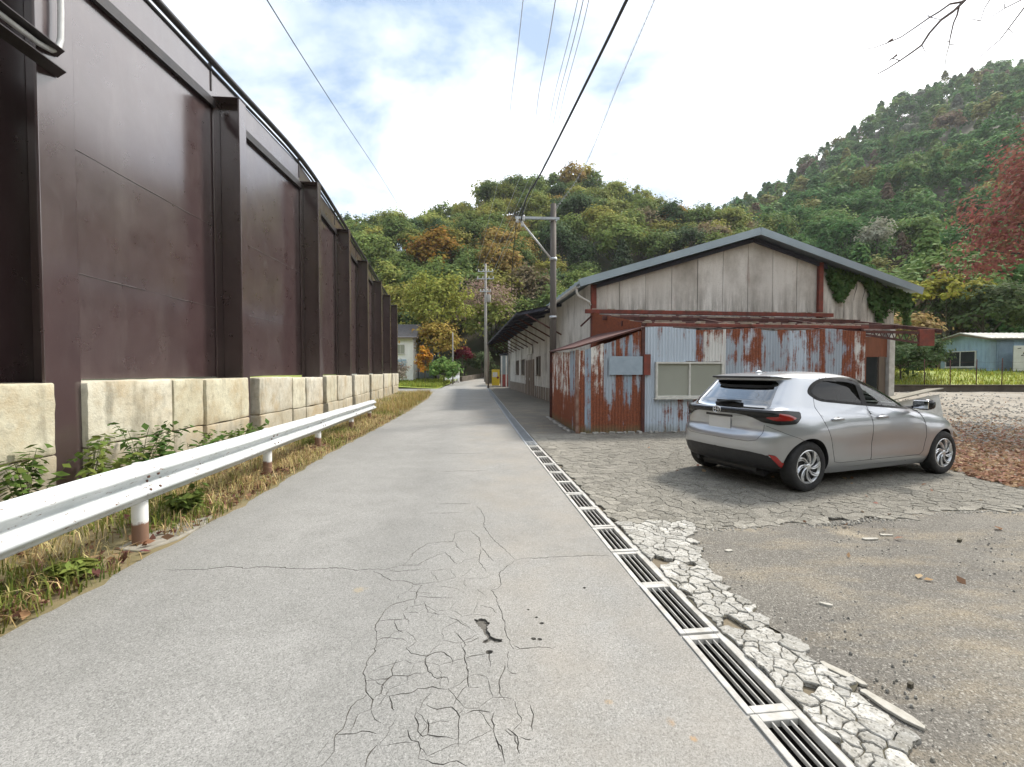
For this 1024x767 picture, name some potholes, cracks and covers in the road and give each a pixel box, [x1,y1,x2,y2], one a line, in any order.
crack [318,513,555,767]
crack [615,522,916,767]
pothole [474,618,502,643]
